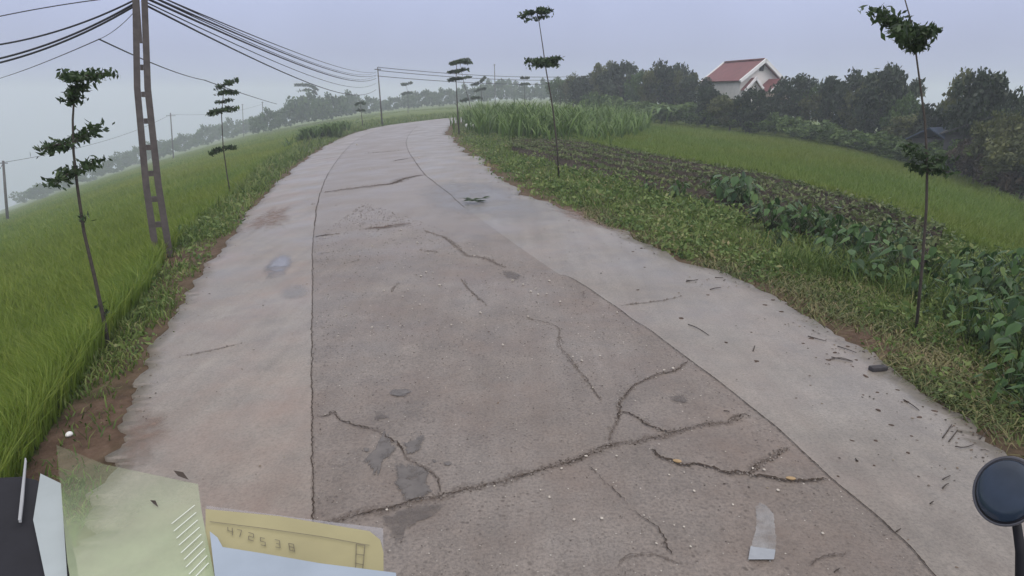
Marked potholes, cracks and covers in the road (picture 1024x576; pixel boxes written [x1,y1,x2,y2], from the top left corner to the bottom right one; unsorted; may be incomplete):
crack [318,312,826,565]
crack [359,222,506,267]
crack [325,151,422,192]
